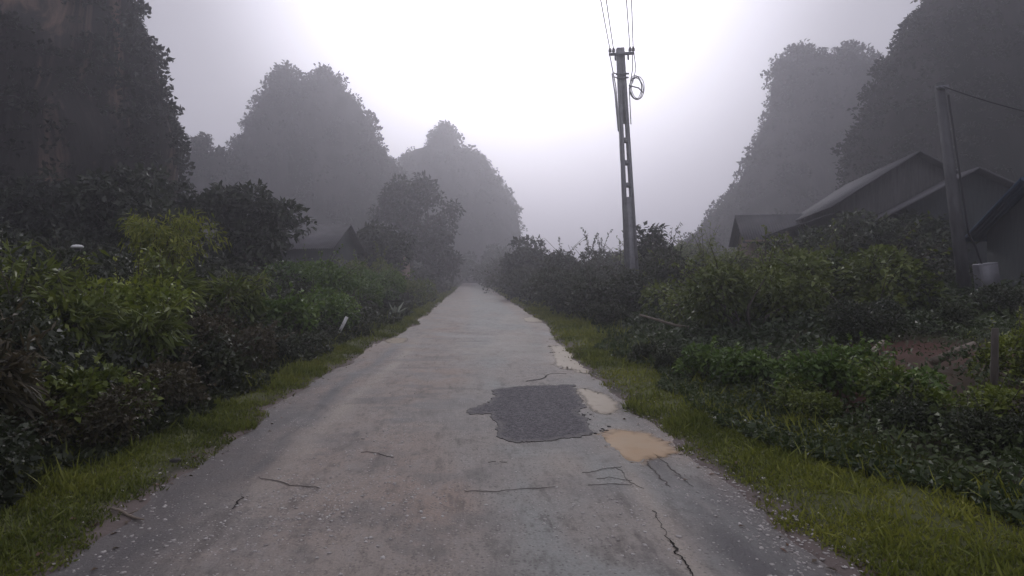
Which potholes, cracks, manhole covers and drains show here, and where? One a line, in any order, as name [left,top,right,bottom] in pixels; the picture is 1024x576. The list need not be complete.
crack [652,510,693,576]
pothole [599,429,678,463]
pothole [577,388,618,414]
crack [582,458,694,488]
pothole [548,345,589,374]
